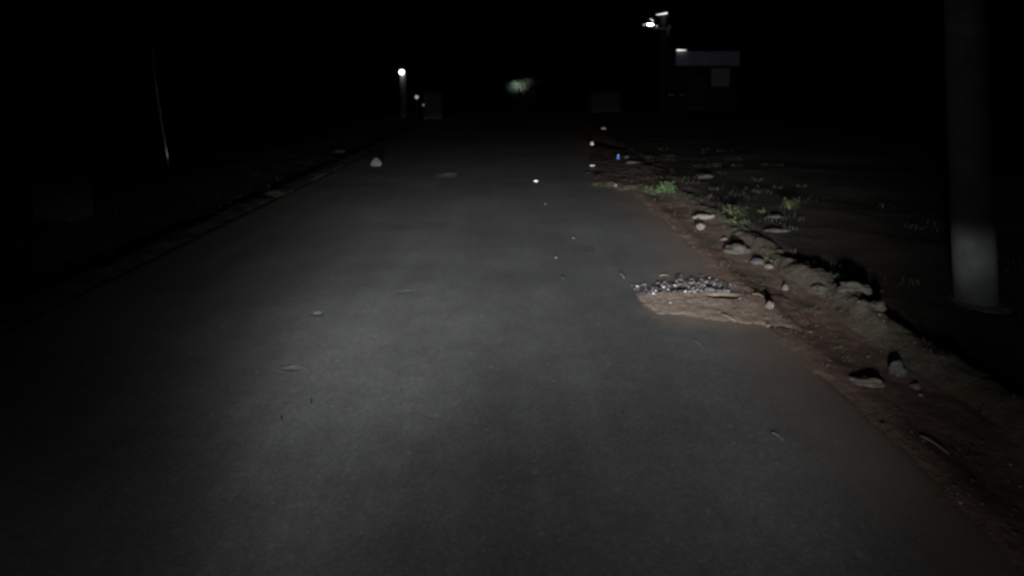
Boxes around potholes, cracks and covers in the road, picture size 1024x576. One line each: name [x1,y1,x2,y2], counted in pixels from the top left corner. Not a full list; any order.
pothole [636,281,810,332]
